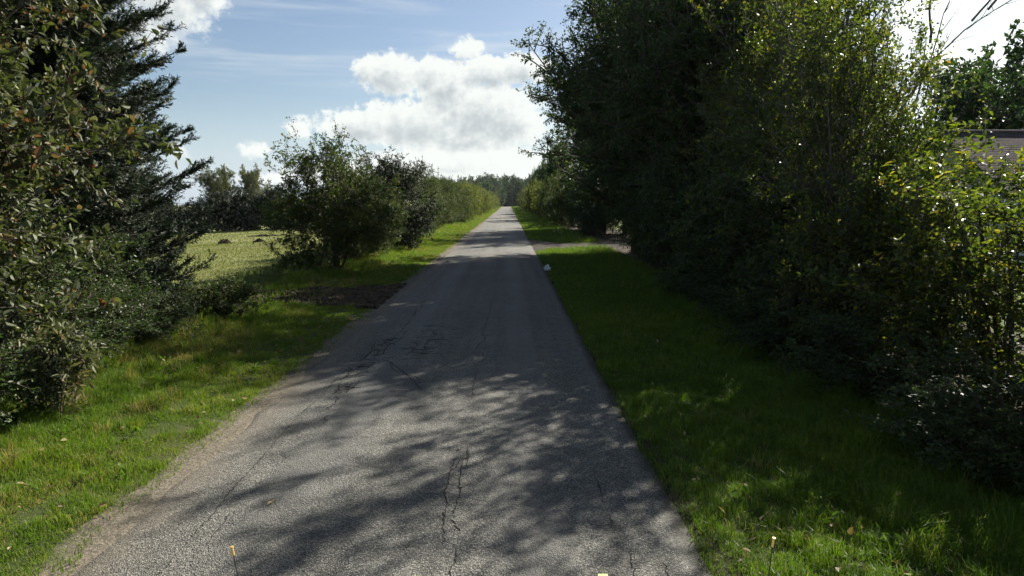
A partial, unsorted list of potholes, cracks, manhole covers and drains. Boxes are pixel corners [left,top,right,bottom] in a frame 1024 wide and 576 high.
crack [158,300,455,574]
crack [442,447,469,576]
